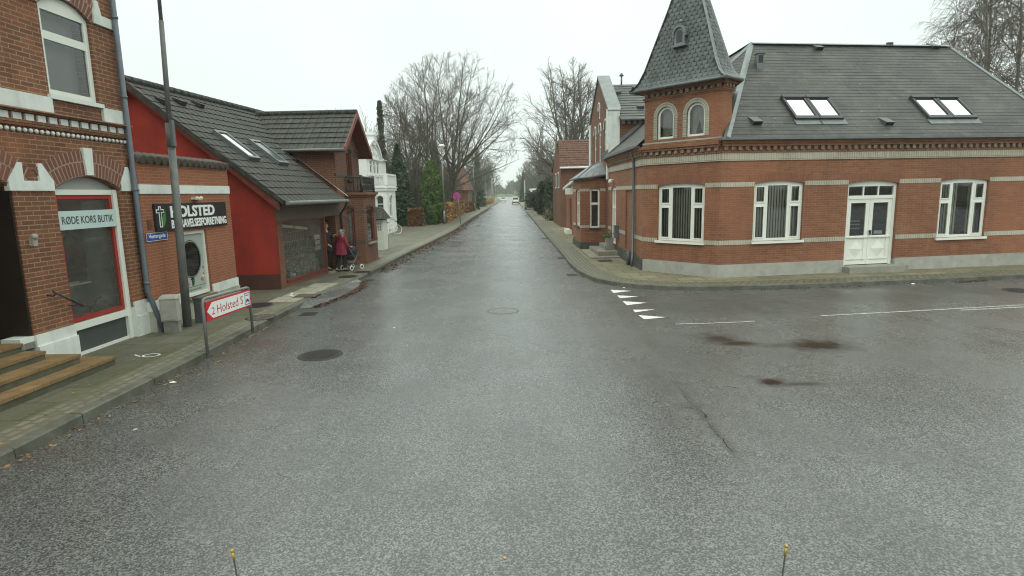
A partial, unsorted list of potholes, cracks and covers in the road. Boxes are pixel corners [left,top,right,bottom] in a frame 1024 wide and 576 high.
manhole cover [297,349,343,361]
crack [671,379,733,454]
